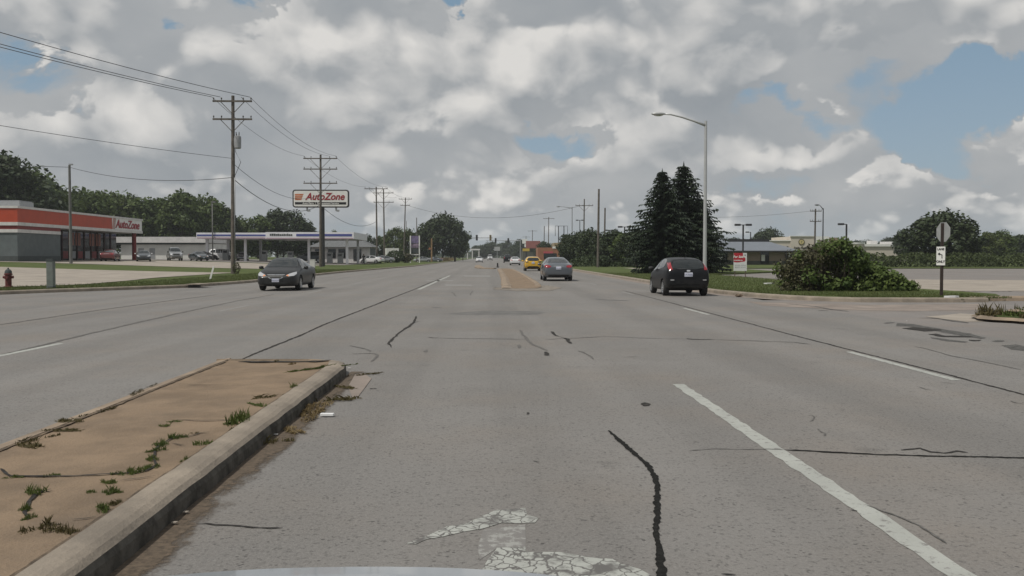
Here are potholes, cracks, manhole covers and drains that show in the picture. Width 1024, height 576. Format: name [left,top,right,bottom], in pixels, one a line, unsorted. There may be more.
crack [784,415,1024,458]
crack [350,316,432,361]
crack [519,330,807,359]
crack [851,505,946,543]
